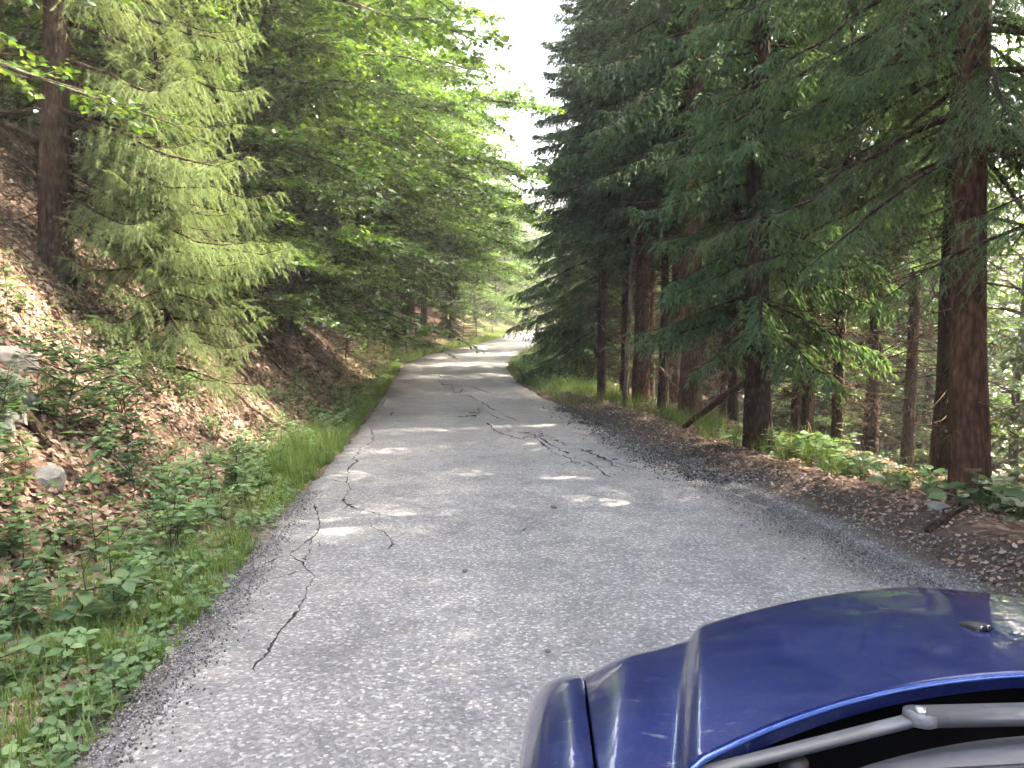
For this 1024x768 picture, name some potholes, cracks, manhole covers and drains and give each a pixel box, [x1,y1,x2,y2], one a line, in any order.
crack [430,375,678,481]
crack [248,430,394,671]
